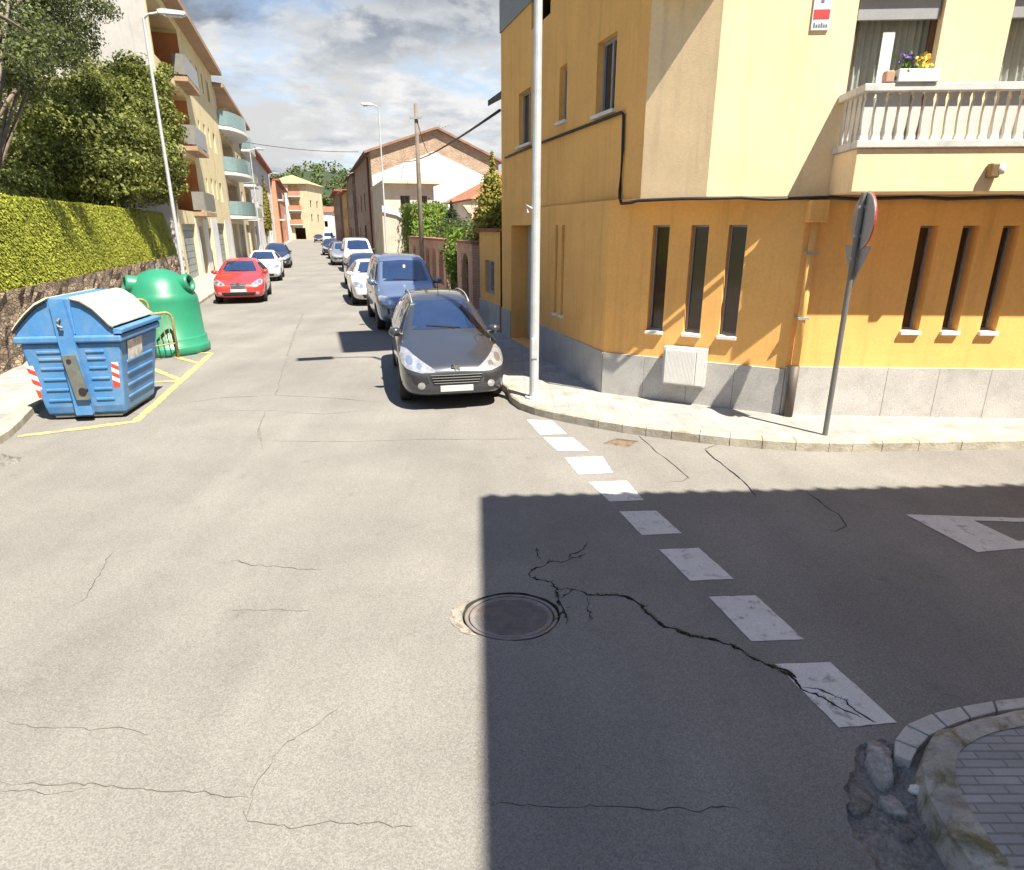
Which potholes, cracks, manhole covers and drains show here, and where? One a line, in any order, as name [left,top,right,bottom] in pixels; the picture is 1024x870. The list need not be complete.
crack [487,802,759,813]
crack [2,711,413,829]
crack [639,436,756,496]
manhole cover [604,439,638,447]
manhole cover [450,592,560,641]
crack [528,542,875,722]
crack [230,560,316,570]
crack [195,314,367,450]
pothole [843,739,947,870]
